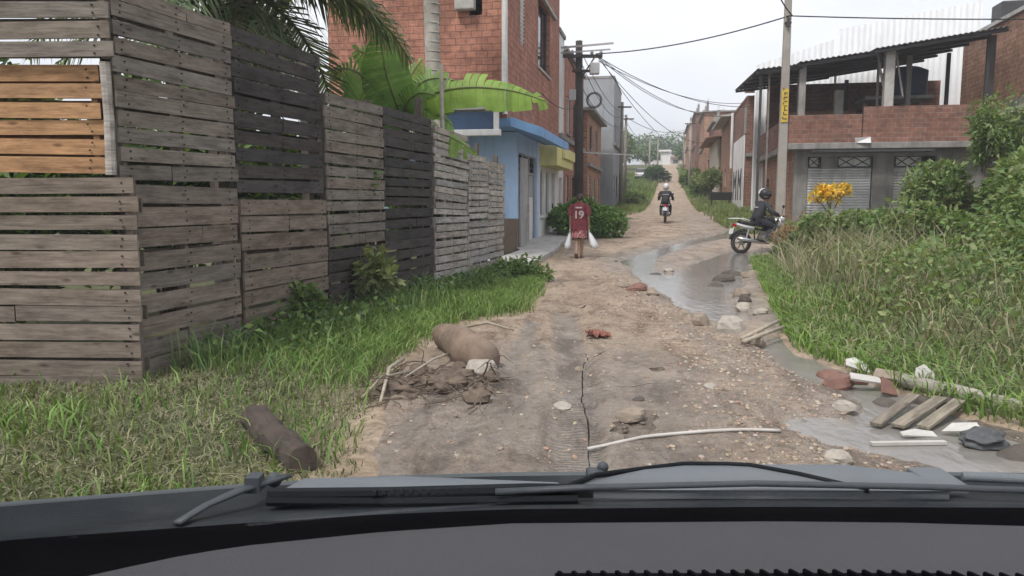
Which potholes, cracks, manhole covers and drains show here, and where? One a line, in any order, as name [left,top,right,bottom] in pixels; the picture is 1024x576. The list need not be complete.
crack [574,348,666,467]
